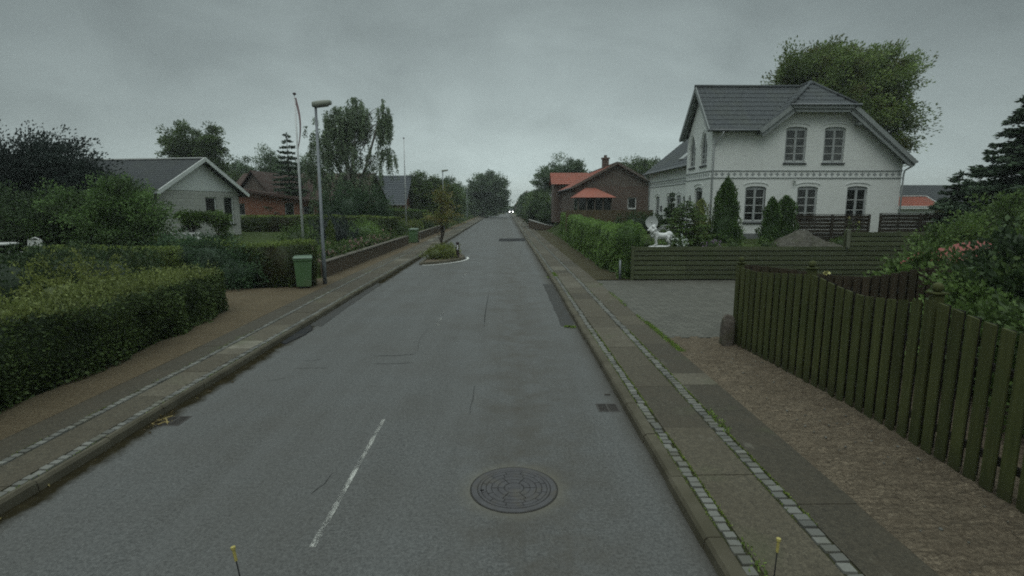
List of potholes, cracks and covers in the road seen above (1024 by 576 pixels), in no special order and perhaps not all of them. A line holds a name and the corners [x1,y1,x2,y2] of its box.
manhole cover [470,467,558,513]
drain grate [595,404,621,412]
drain grate [154,416,192,426]
